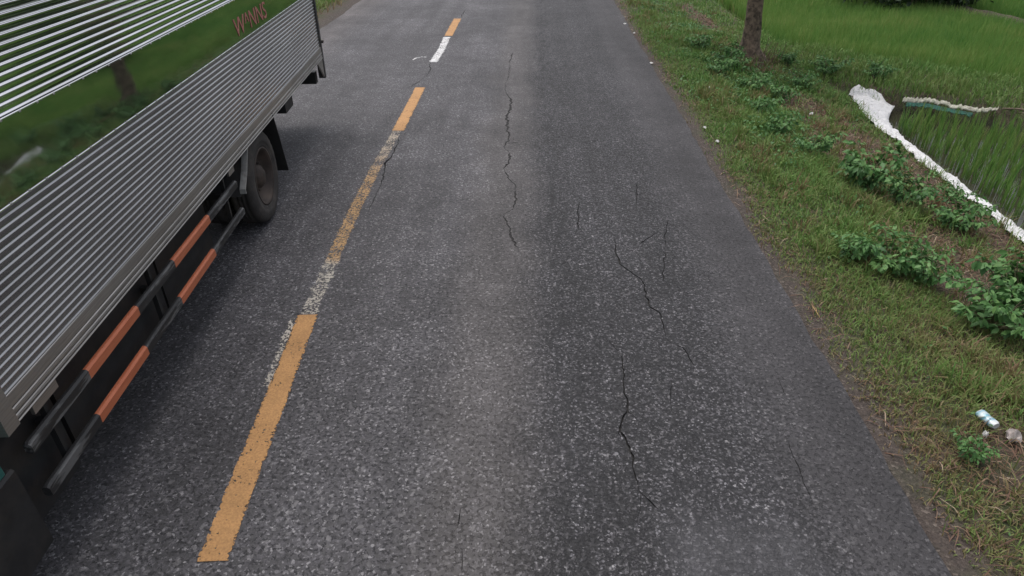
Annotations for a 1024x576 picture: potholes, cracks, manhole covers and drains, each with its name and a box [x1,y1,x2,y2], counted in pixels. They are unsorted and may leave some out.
crack [601,336,658,528]
crack [615,222,694,414]
crack [368,140,399,214]
crack [503,53,519,248]
